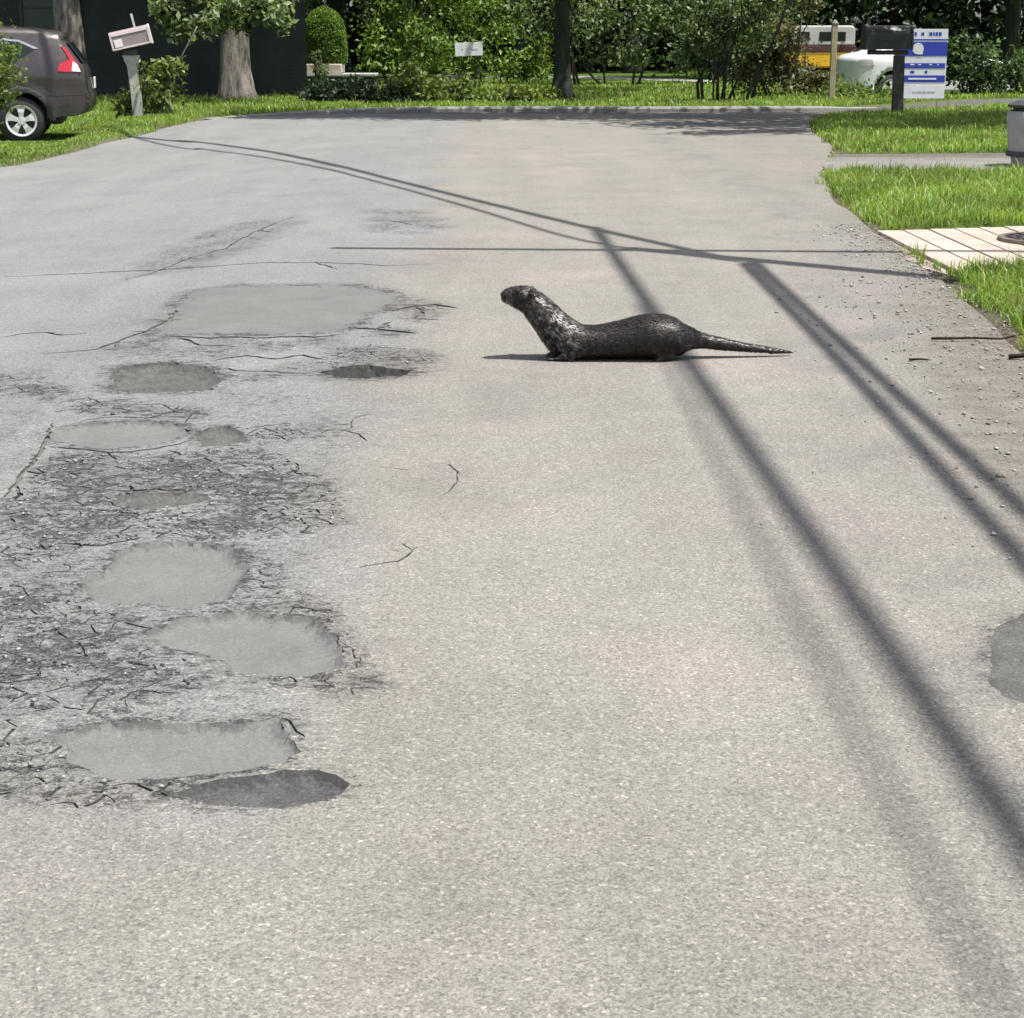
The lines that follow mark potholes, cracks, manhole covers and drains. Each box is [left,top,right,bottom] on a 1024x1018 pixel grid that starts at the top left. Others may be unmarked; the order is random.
pothole [81,542,250,608]
crack [0,729,171,808]
crack [0,423,342,560]
crack [5,262,445,277]
crack [5,376,193,423]
pothole [109,362,222,393]
pothole [145,610,351,676]
pothole [320,365,413,378]
crack [330,414,371,441]
crack [359,543,418,568]
crack [284,718,305,737]
manhole cover [997,232,1024,246]
